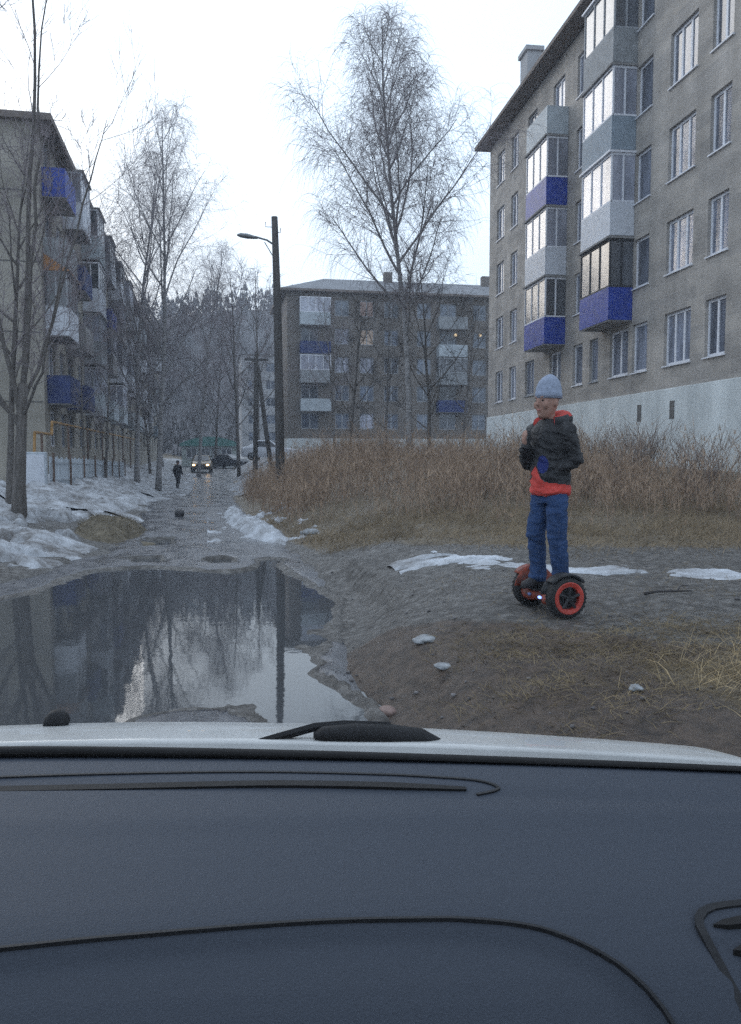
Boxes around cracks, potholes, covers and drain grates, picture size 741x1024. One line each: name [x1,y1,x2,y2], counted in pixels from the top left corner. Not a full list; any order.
pothole [139,536,177,546]
pothole [0,556,390,726]
